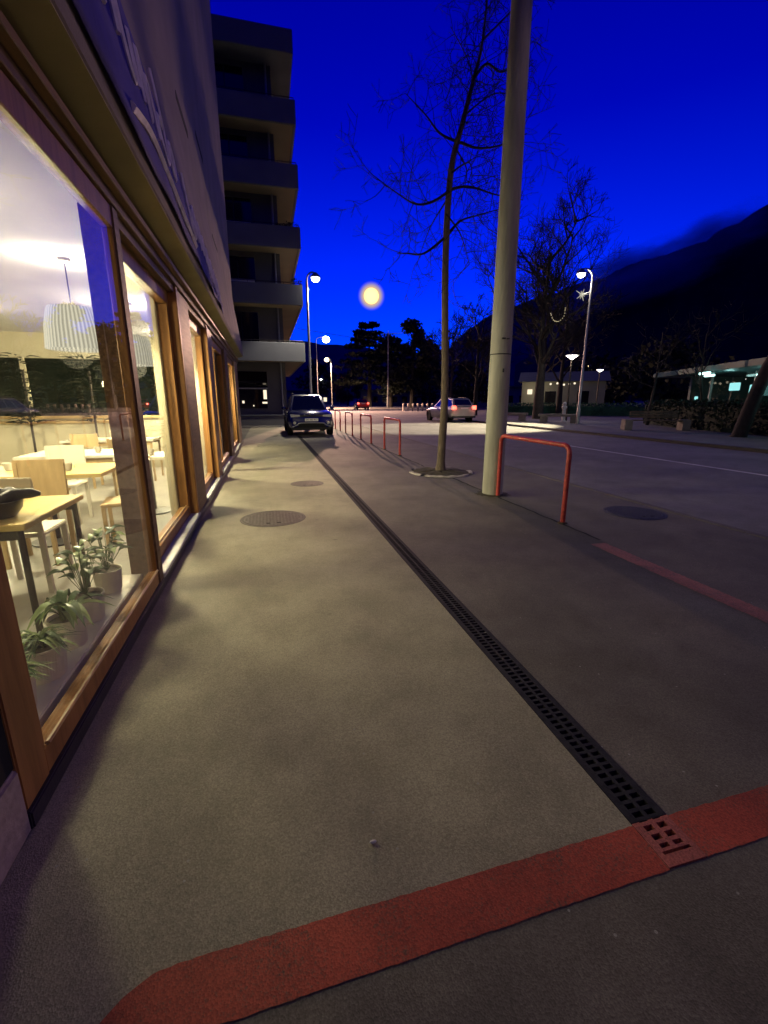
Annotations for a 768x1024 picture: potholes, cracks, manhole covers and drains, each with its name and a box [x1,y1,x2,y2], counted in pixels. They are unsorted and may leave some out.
manhole cover [240,510,306,527]
manhole cover [603,506,667,520]
